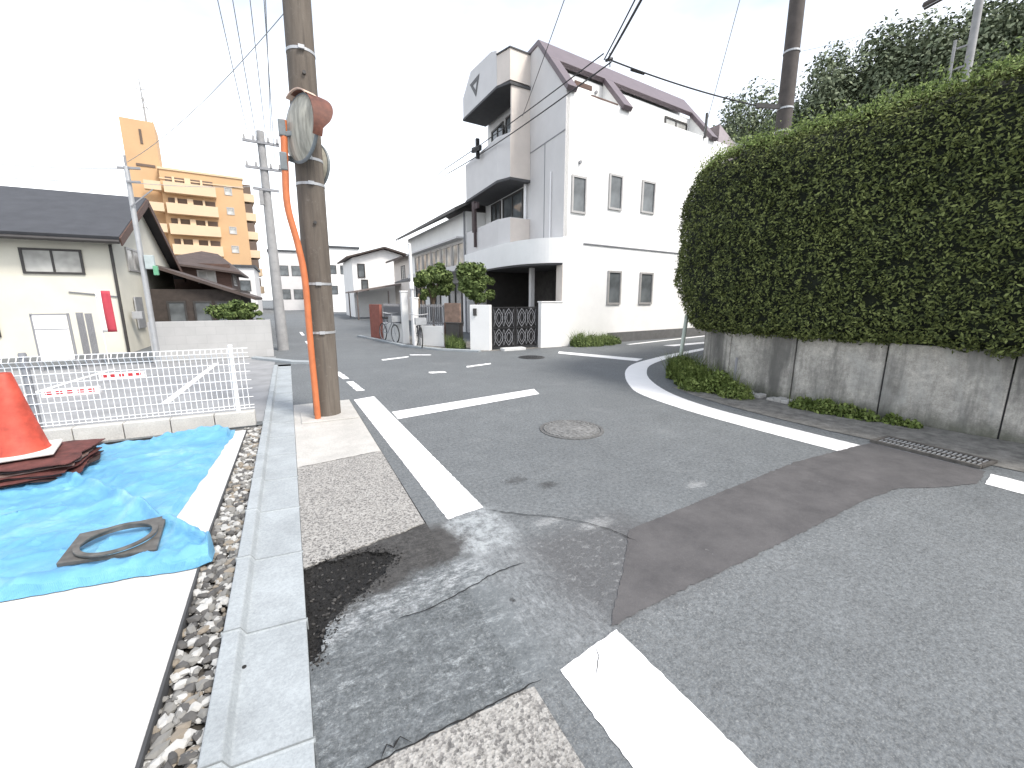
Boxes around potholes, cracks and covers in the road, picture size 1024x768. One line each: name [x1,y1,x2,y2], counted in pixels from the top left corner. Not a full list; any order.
crack [398,563,521,619]
manhole cover [540,420,604,440]
drain grate [870,435,998,469]
pothole [304,545,405,671]
